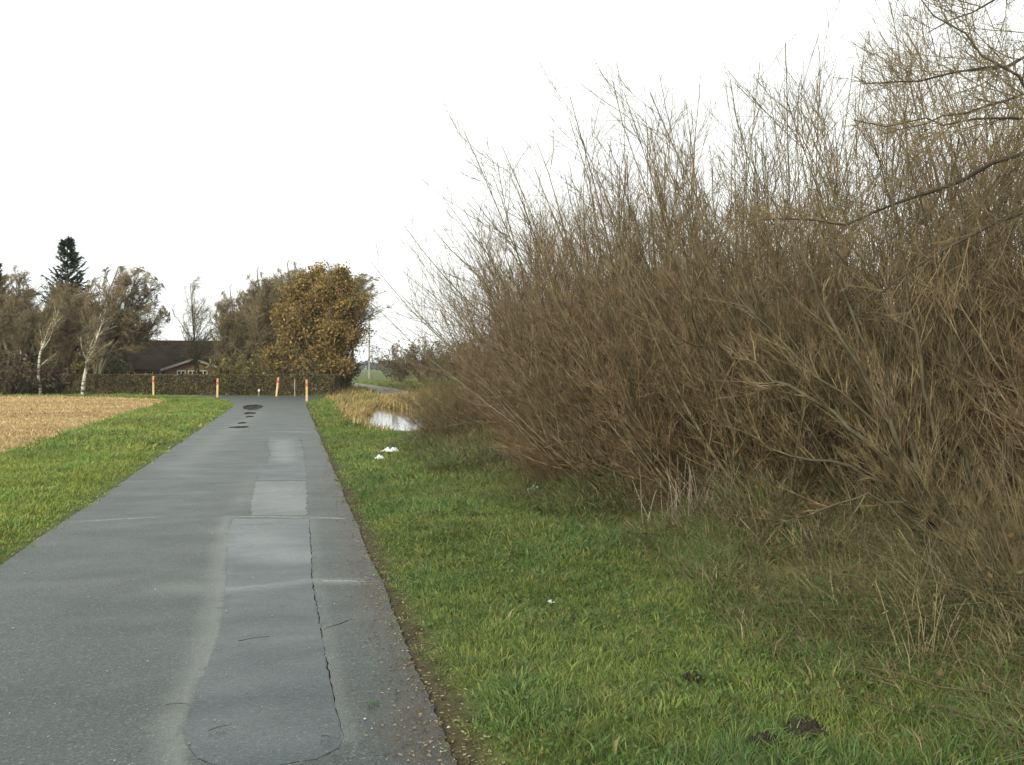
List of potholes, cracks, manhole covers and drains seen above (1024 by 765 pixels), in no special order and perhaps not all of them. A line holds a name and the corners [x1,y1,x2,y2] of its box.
crack [229,516,361,736]
